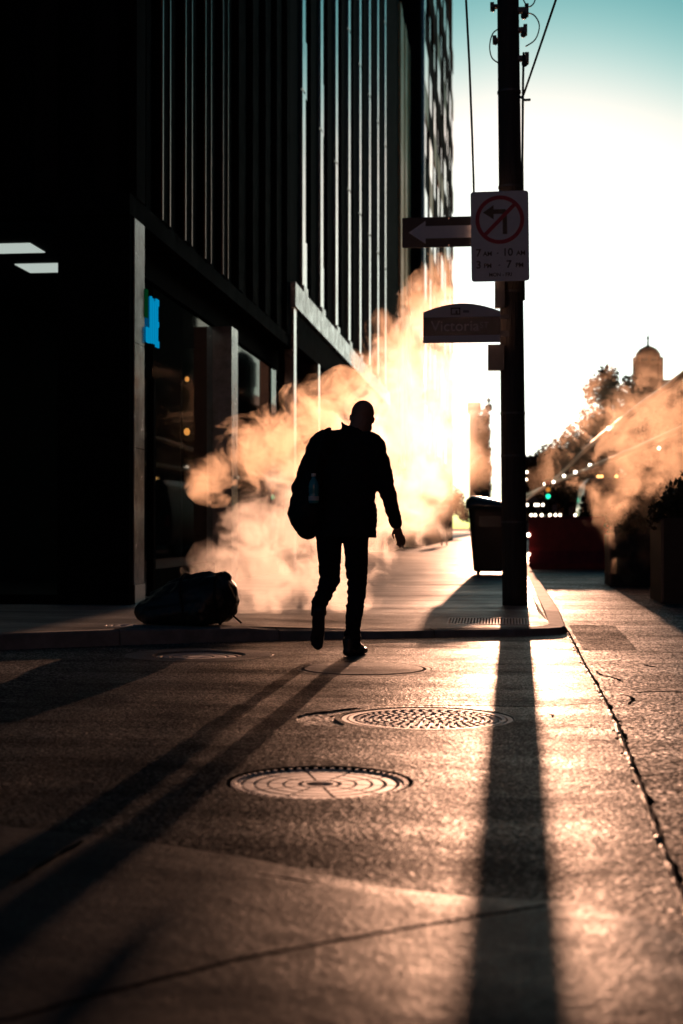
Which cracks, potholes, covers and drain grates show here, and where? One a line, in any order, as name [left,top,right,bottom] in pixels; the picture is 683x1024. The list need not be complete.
drain grate [447,617,529,628]
manhole cover [296,662,431,676]
manhole cover [124,648,274,662]
manhole cover [341,707,514,730]
crack [596,671,683,706]
manhole cover [226,766,414,799]
